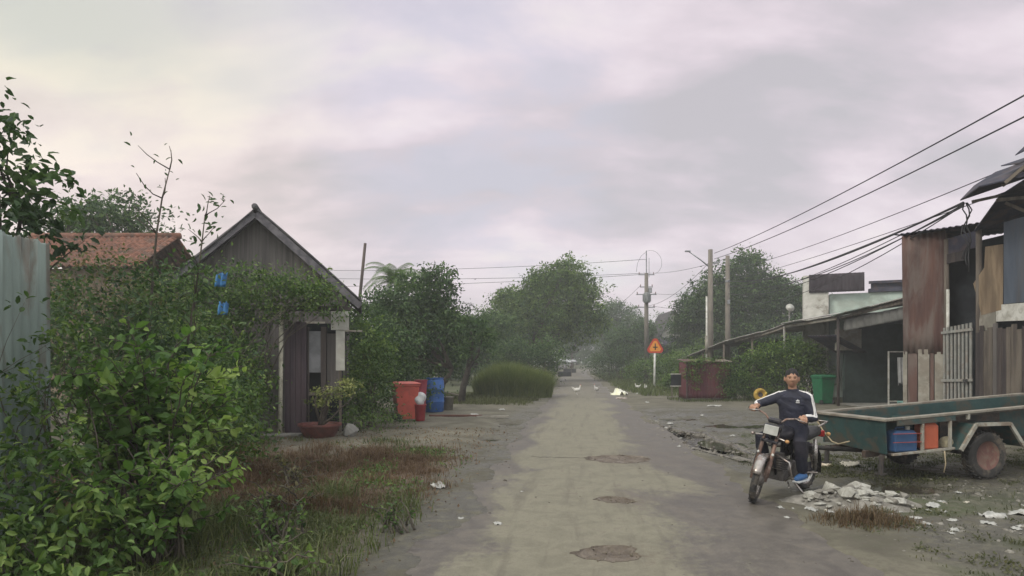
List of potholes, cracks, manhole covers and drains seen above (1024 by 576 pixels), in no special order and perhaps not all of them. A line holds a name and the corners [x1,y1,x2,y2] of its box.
pothole [584,454,651,464]
pothole [593,496,637,504]
pothole [570,545,642,563]
